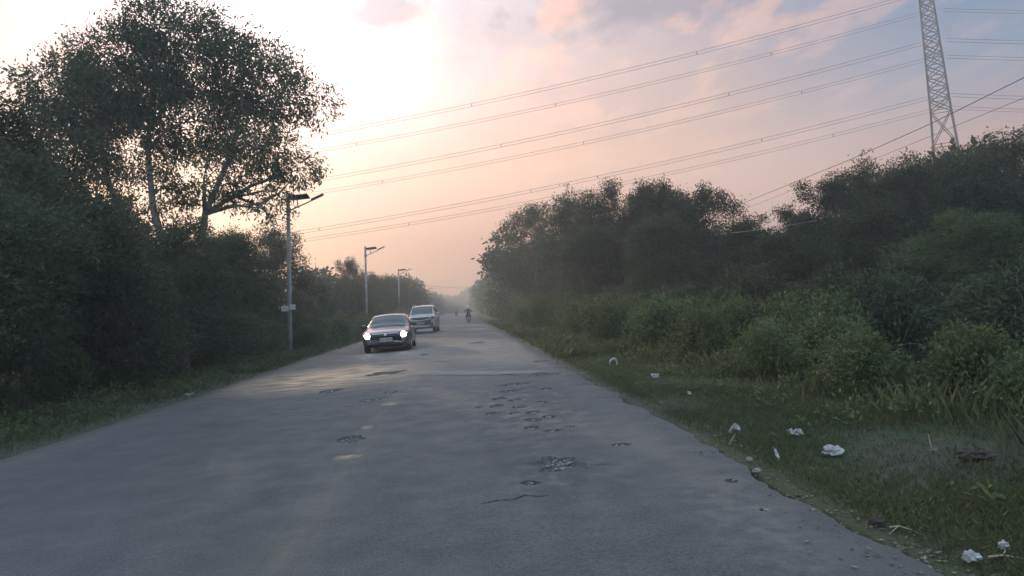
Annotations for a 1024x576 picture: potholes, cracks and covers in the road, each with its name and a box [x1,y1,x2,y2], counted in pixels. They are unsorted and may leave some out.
pothole [336,435,367,443]
pothole [524,456,588,473]
crack [482,494,549,504]
